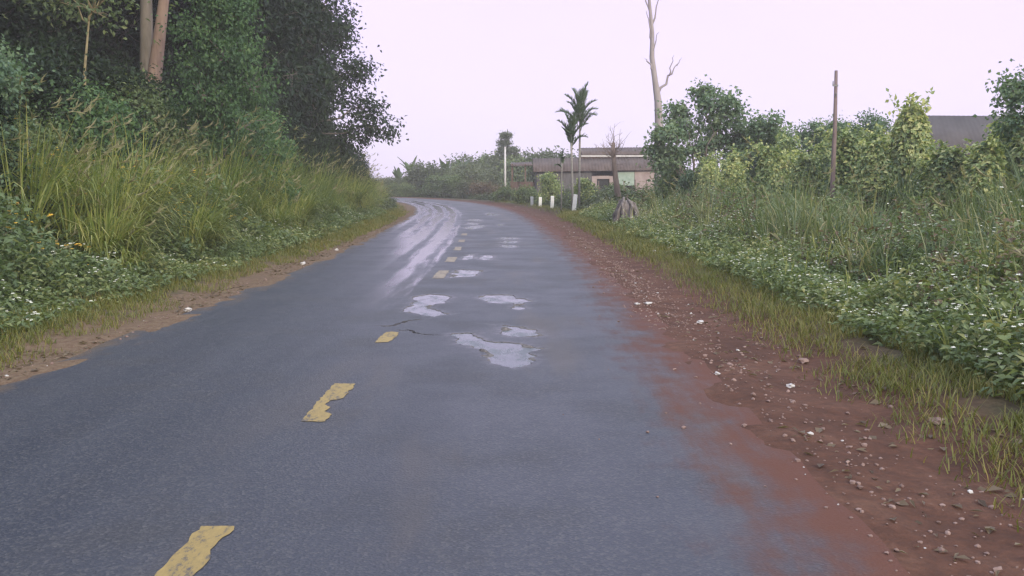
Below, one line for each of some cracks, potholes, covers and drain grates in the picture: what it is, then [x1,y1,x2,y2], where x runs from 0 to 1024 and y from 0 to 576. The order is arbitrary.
pothole [450,333,545,368]
pothole [449,269,483,278]
pothole [403,294,451,317]
pothole [479,294,533,310]
pothole [500,325,543,337]
crack [377,319,432,335]
